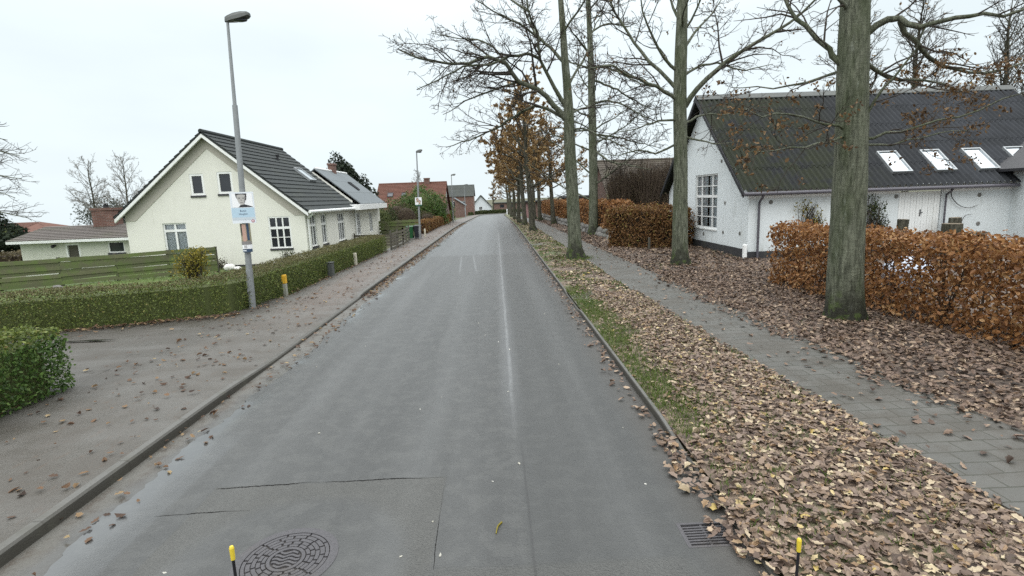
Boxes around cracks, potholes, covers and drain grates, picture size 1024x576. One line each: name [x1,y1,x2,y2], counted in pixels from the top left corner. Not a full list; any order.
drain grate [675,521,739,548]
manhole cover [229,528,339,576]
